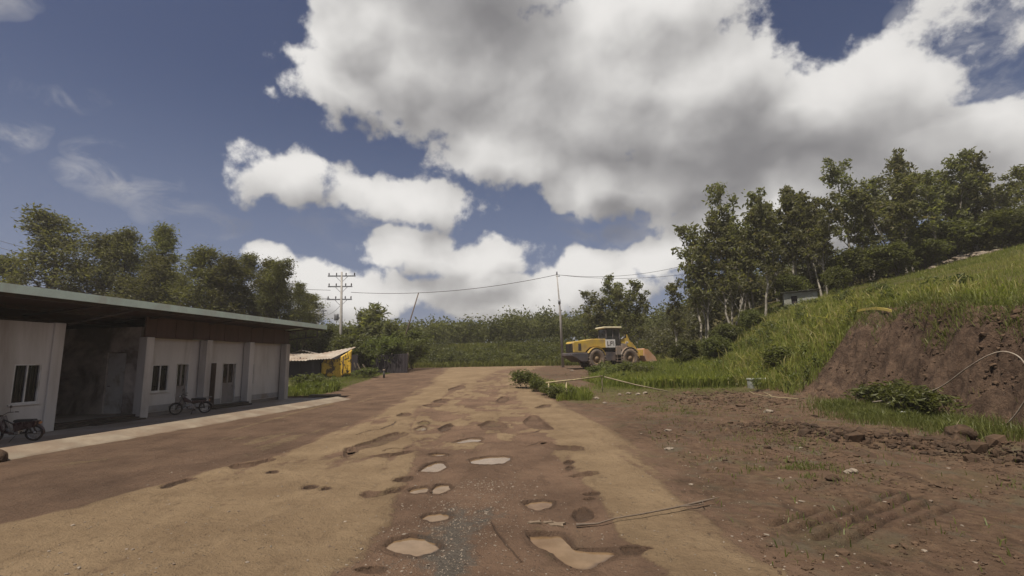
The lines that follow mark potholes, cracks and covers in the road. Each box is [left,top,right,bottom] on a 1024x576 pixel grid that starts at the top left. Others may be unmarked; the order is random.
pothole [357,485,410,499]
pothole [403,485,433,495]
pothole [435,423,455,433]
pothole [522,530,625,572]
pothole [475,420,510,431]
pothole [465,455,513,465]
pothole [417,461,449,473]
pothole [570,506,598,523]
pothole [227,457,276,469]
pothole [378,533,445,558]
pothole [417,511,455,523]
pothole [346,432,409,453]
